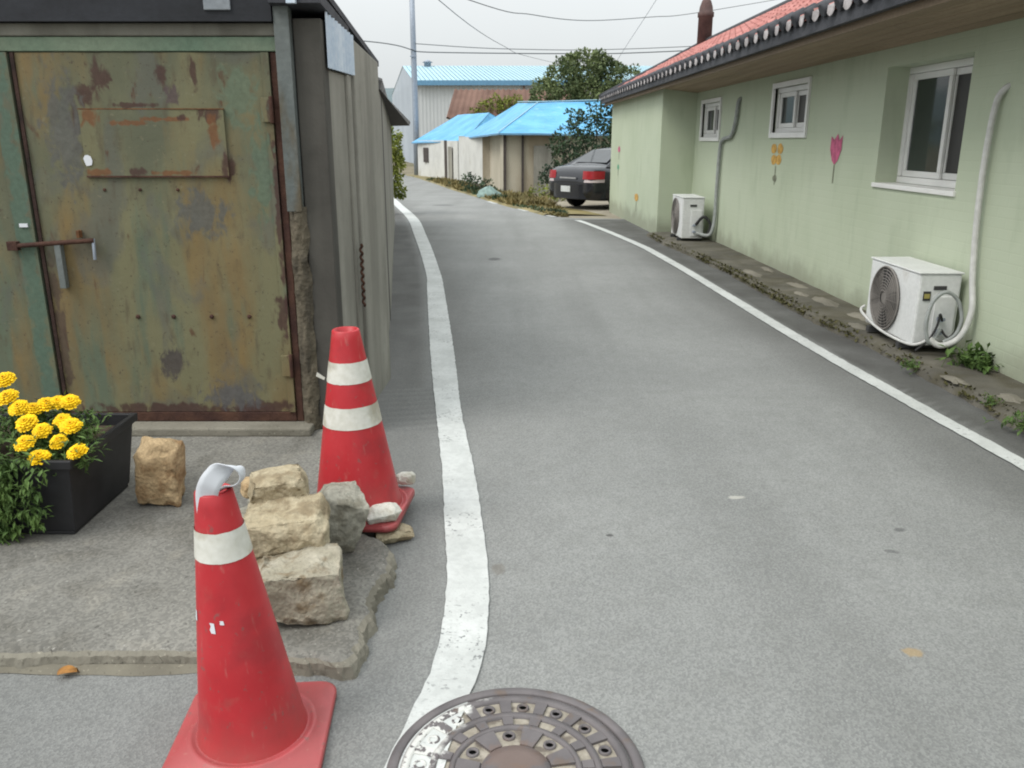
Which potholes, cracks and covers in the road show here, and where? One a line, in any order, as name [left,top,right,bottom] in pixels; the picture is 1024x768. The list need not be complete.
manhole cover [387,688,645,768]
